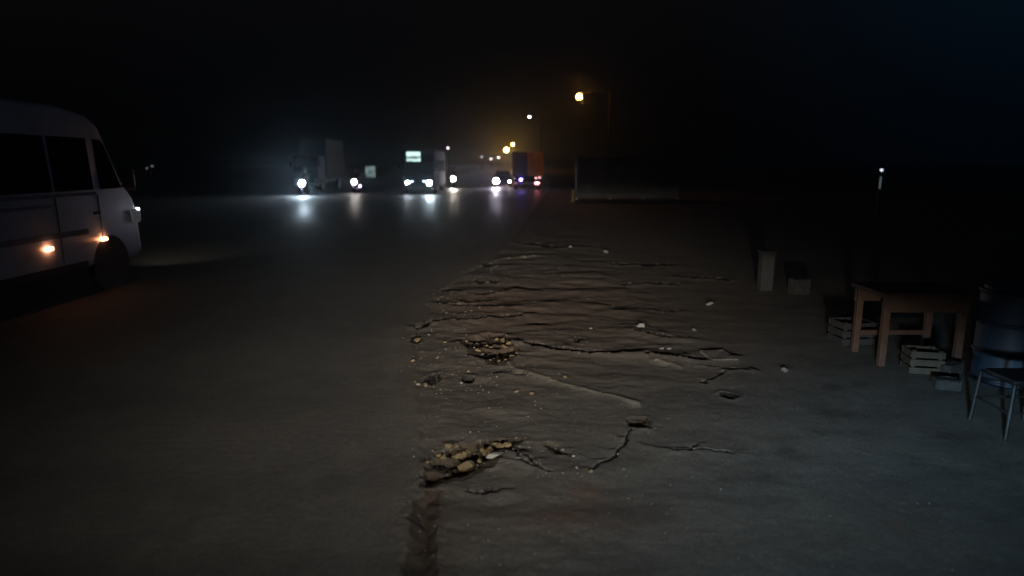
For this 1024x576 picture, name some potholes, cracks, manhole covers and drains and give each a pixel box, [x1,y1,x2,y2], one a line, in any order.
pothole [420,372,444,386]
pothole [419,437,525,488]
crack [590,428,631,470]
crack [480,242,563,267]
crack [506,448,552,472]
crack [414,288,522,329]
crack [492,329,749,408]
crack [610,263,731,286]
crack [467,486,500,495]
crack [660,443,734,454]
pothole [460,332,519,365]
